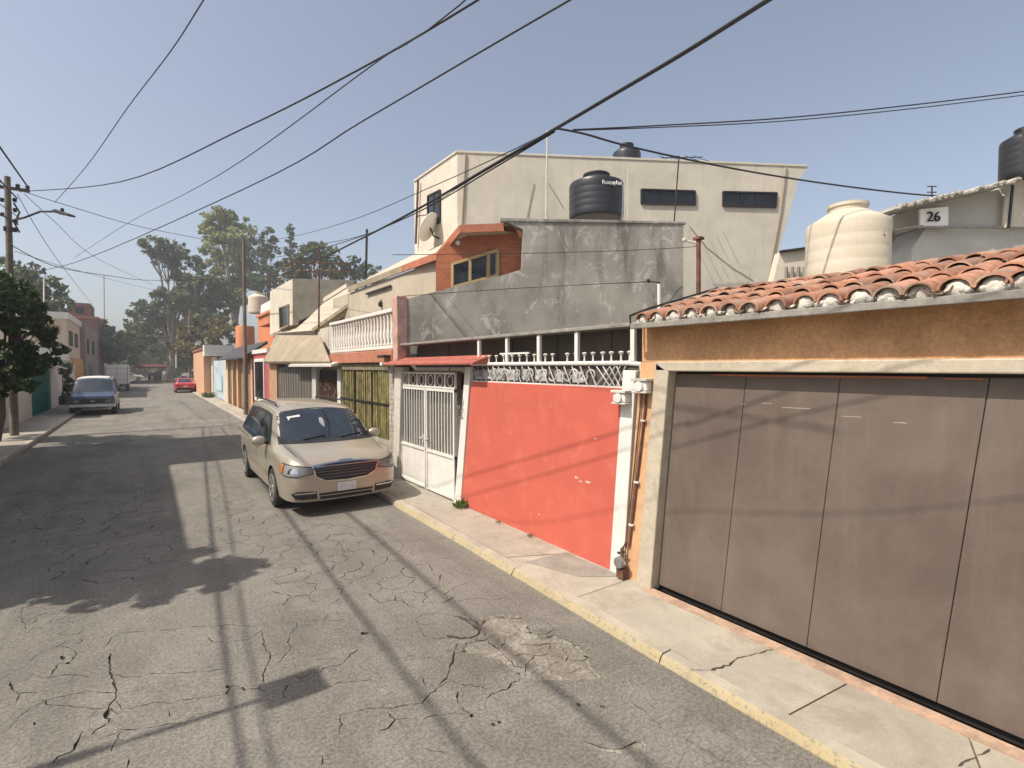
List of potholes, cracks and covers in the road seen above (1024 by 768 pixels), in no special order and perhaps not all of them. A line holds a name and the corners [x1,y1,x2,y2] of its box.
crack [673,649,772,670]
crack [1,490,585,767]
